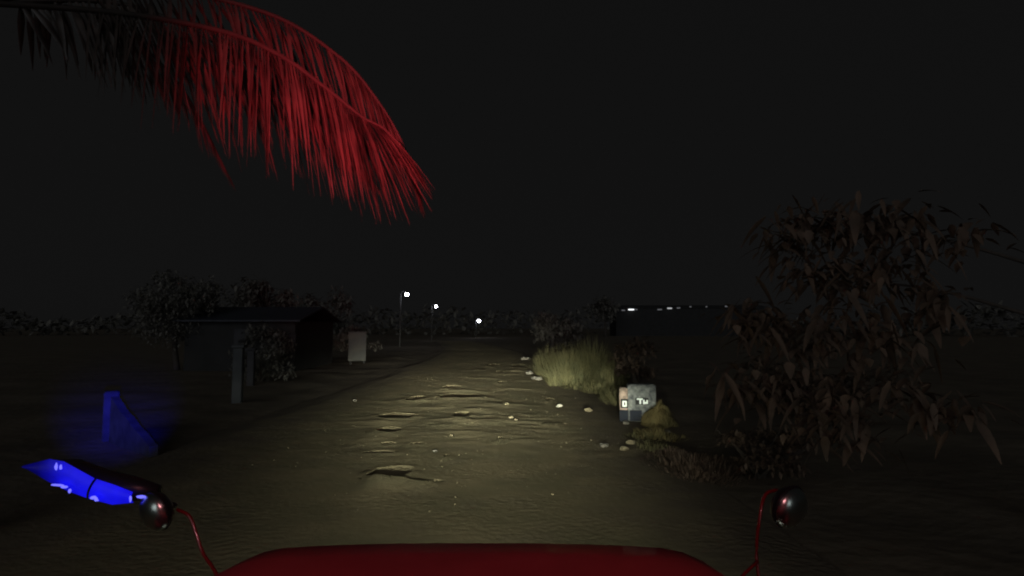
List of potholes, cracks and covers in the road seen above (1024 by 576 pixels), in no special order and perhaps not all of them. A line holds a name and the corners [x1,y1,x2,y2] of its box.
pothole [356,463,422,480]
pothole [365,425,410,435]
pothole [446,410,479,420]
pothole [398,395,433,404]
pothole [371,412,426,420]
